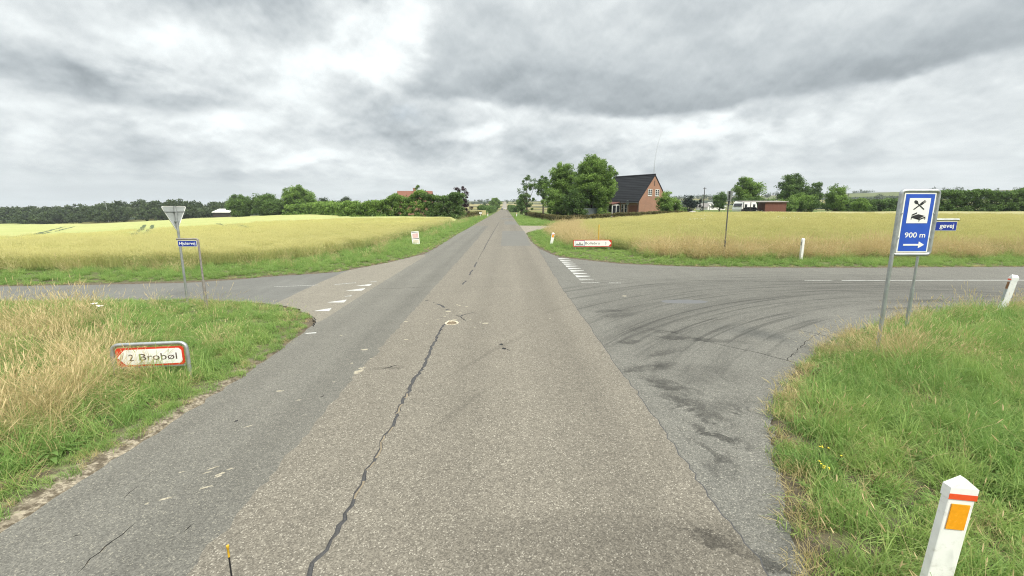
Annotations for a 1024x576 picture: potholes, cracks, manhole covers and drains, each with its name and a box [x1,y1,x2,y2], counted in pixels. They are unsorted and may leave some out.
crack [73,525,133,572]
crack [387,226,497,321]
